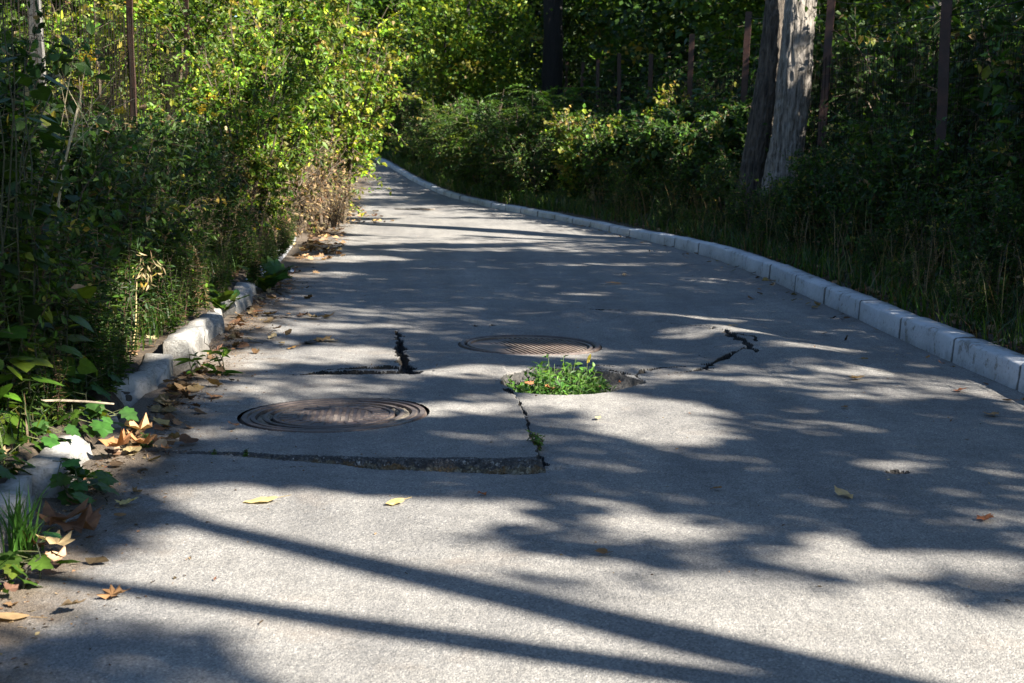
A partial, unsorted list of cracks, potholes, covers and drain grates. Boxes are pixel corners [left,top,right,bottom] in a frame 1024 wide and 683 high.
pothole [501,368,646,393]
manhole cover [237,398,430,433]
crack [133,388,550,475]
manhole cover [458,334,602,356]
crack [556,323,759,381]
crack [293,330,422,375]
